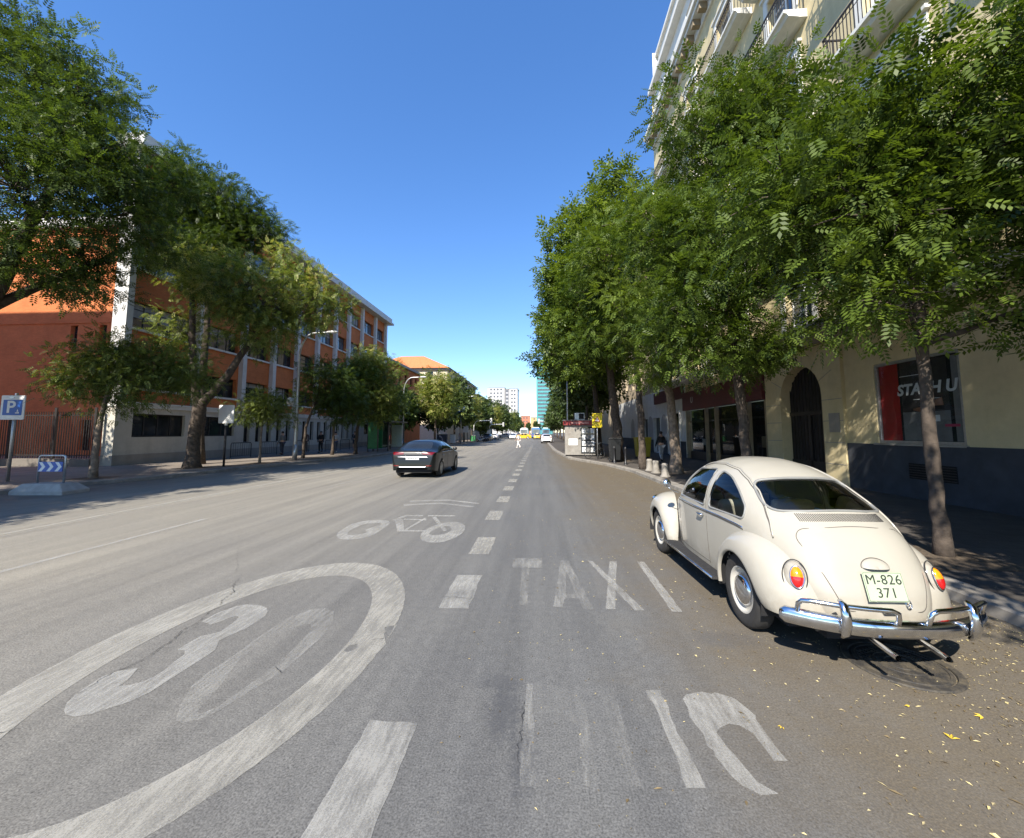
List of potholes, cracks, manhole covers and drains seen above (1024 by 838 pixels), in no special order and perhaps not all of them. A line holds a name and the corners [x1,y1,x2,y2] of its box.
manhole cover [840,639,969,694]
